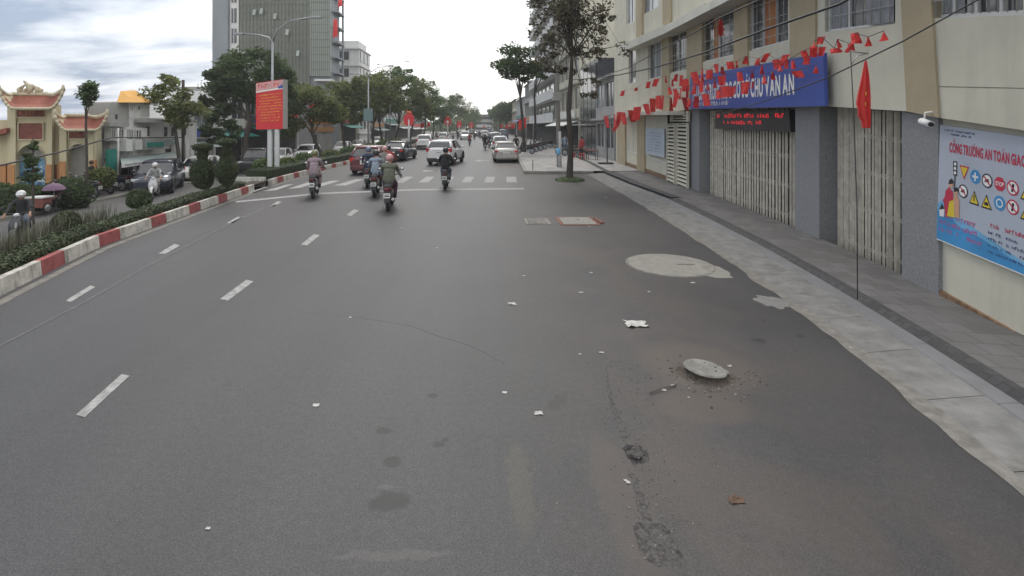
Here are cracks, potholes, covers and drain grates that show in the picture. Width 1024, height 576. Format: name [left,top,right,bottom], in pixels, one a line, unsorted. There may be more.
pothole [623,444,650,465]
crack [604,355,631,439]
manhole cover [674,359,737,388]
manhole cover [555,217,604,225]
manhole cover [625,254,716,278]
